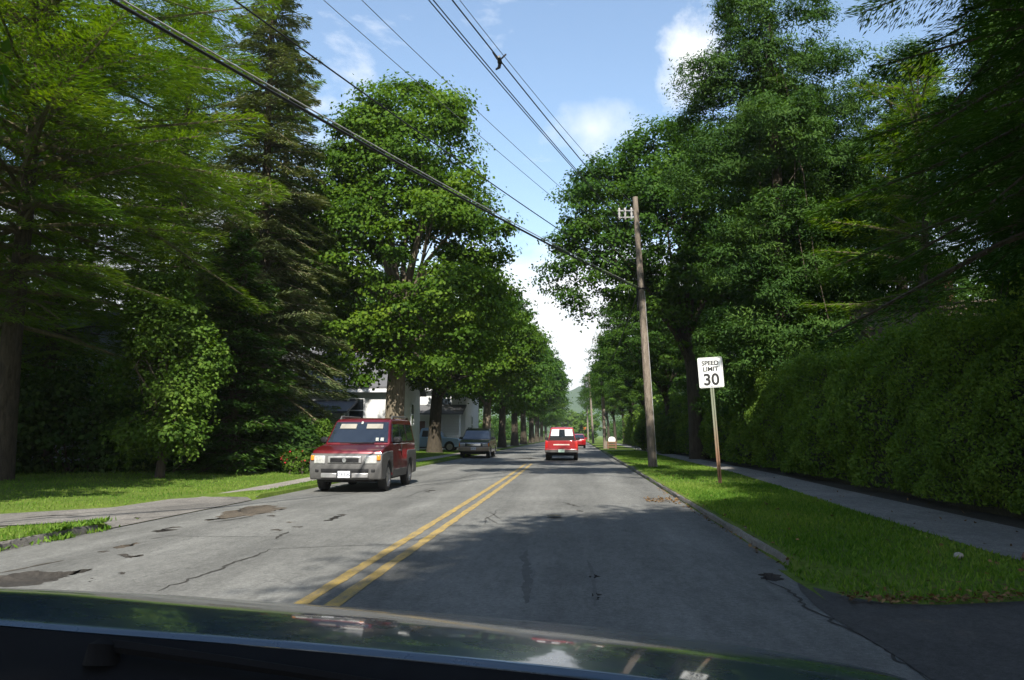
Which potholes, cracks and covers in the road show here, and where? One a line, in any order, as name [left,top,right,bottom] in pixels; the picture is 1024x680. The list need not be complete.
pothole [758,573,784,581]
crack [763,579,928,680]
pothole [0,568,93,587]
pothole [205,505,287,521]
crack [153,516,383,591]
